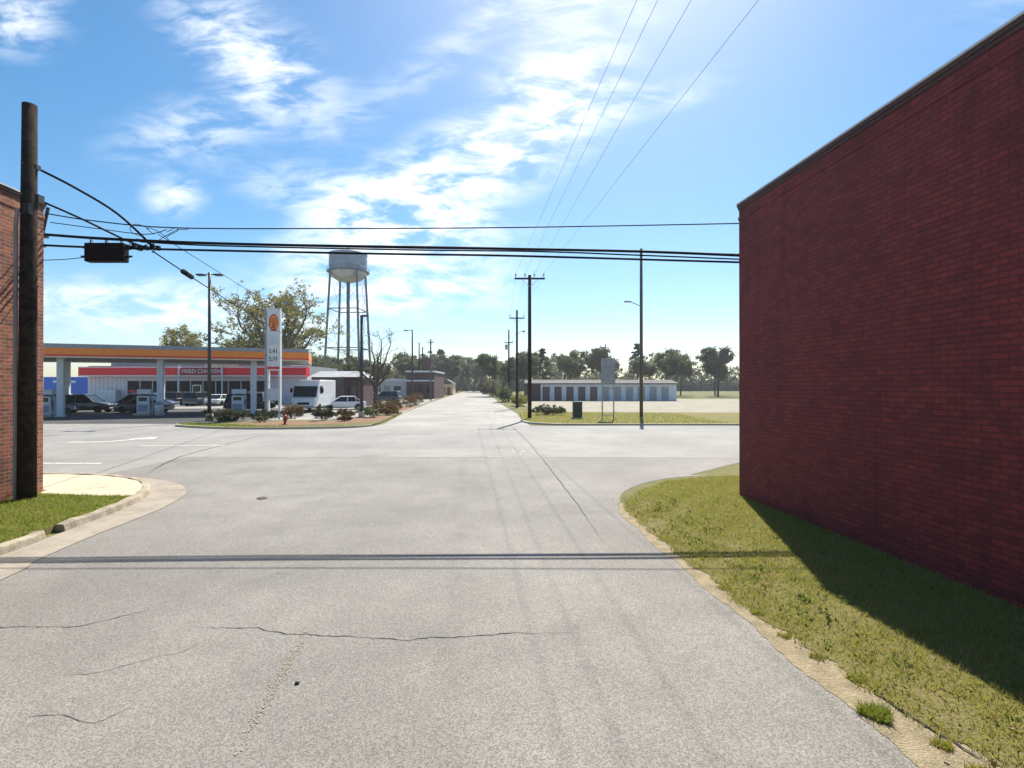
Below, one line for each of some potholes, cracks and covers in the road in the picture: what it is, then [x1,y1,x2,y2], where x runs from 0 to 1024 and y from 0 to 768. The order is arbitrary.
crack [529,443,603,541]
crack [28,708,128,723]
crack [206,627,569,640]
